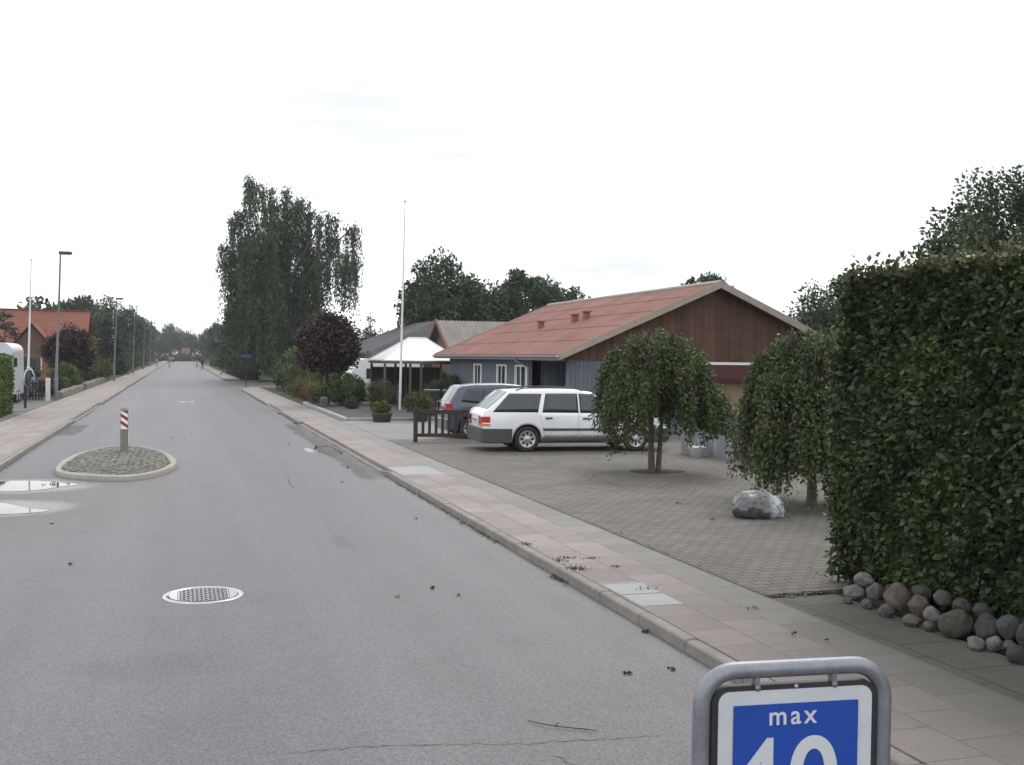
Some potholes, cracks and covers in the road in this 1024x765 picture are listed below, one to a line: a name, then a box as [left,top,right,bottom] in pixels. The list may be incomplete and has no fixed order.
manhole cover [162,586,244,604]
crack [285,734,672,765]
pothole [314,445,344,456]
